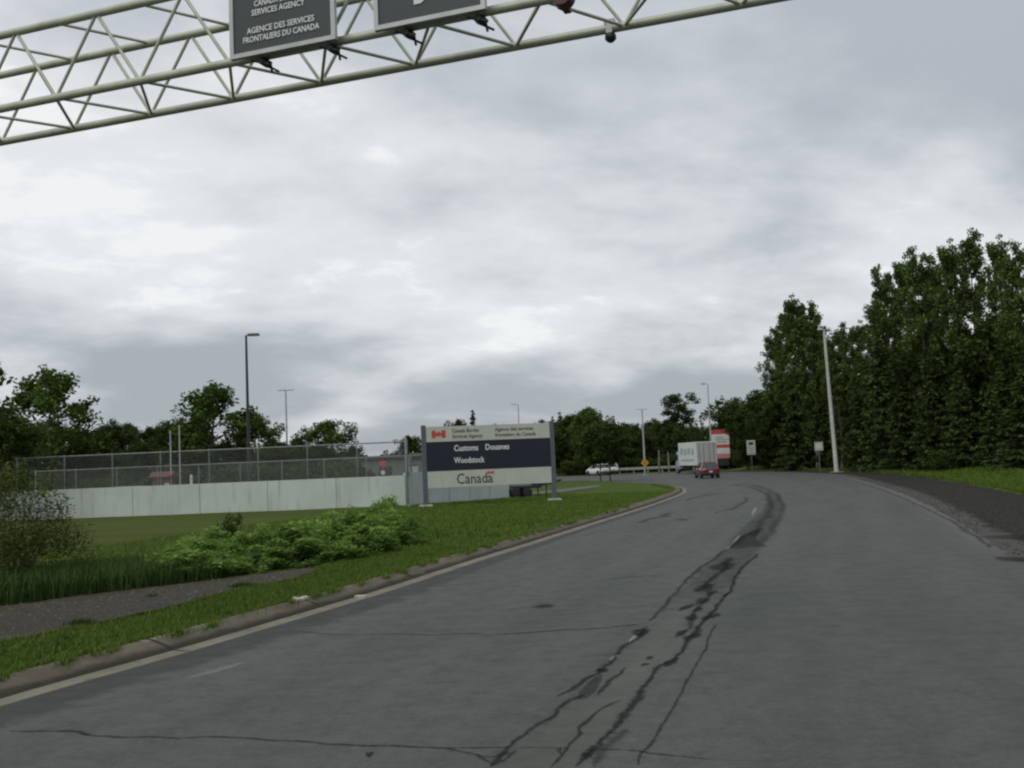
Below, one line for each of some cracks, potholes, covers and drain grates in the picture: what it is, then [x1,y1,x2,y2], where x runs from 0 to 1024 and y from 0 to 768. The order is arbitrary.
crack [22,623,646,766]
